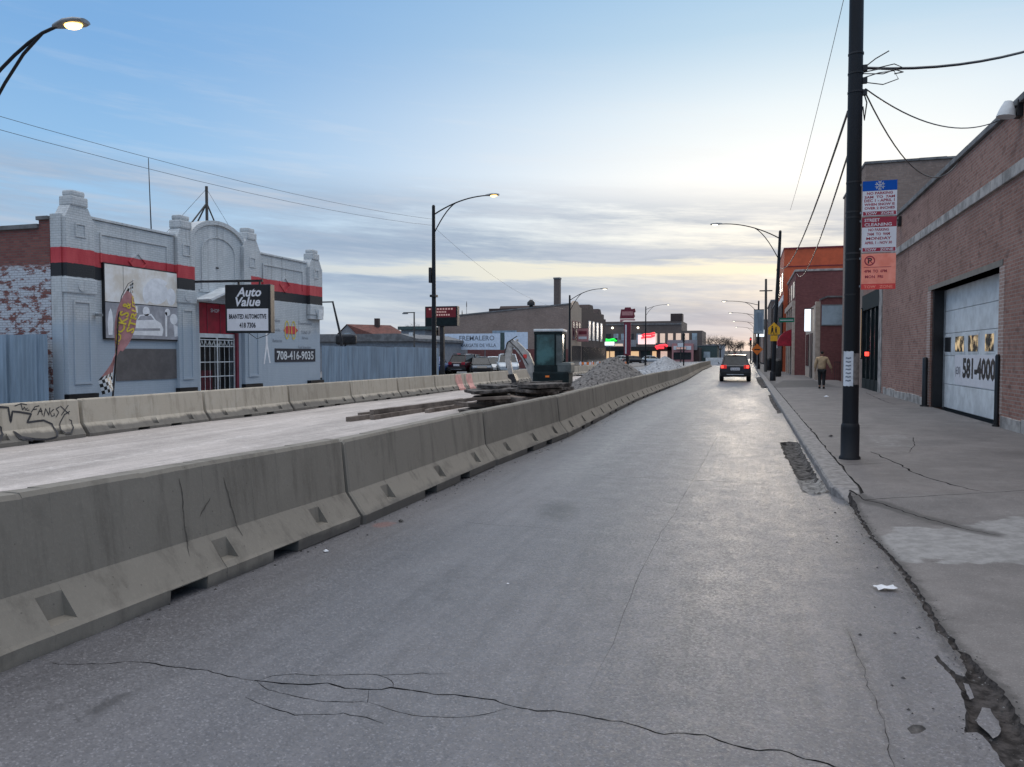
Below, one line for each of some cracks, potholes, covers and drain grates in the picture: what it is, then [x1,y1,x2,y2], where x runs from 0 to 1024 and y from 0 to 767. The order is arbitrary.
pothole [780,442,829,494]
pothole [934,651,1024,767]
crack [54,661,835,767]
